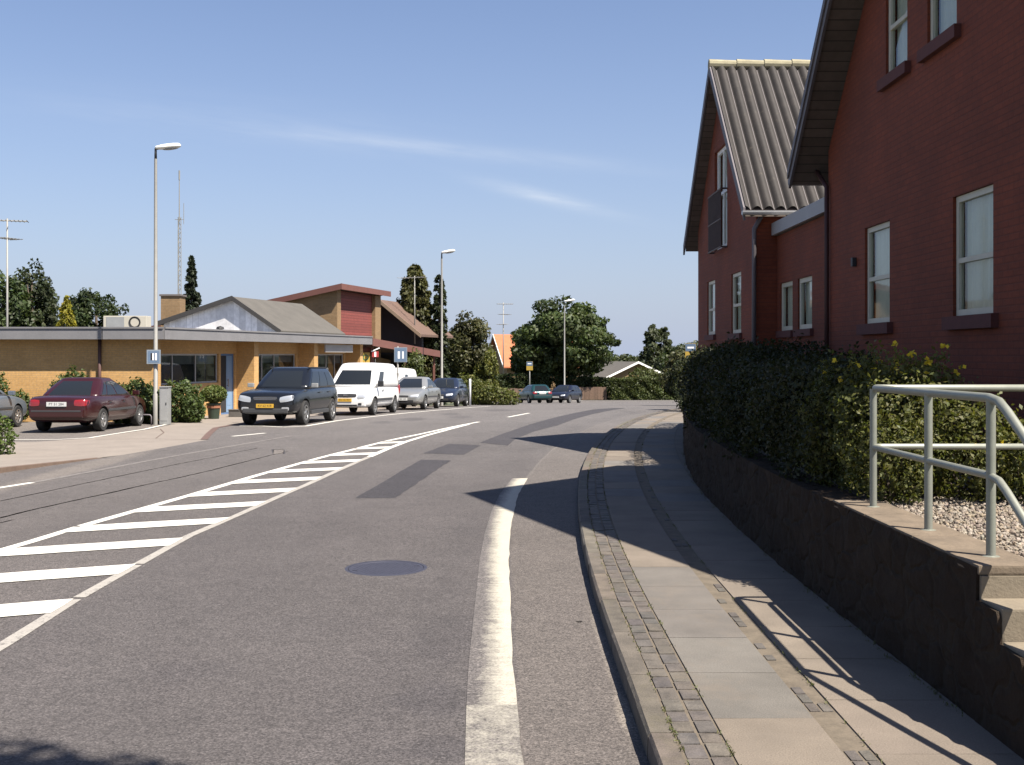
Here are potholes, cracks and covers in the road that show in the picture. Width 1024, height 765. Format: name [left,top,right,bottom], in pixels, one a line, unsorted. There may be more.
manhole cover [345,560,427,576]
